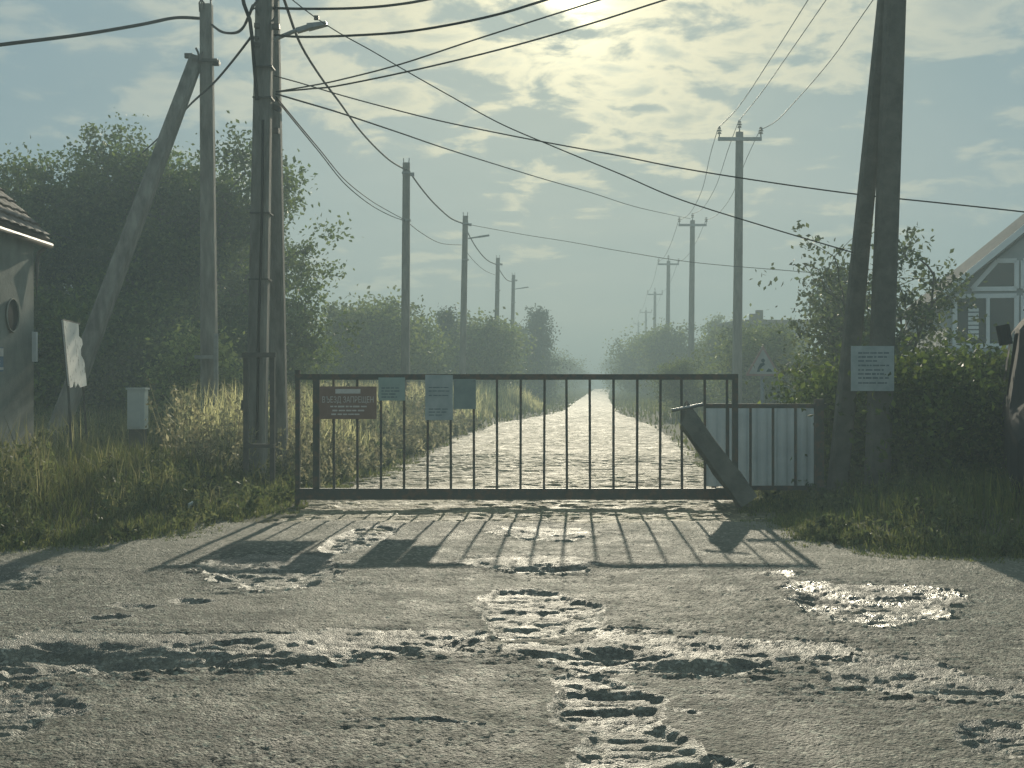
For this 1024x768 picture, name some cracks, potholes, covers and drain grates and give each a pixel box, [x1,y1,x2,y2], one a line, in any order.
pothole [807,654,1024,702]
pothole [318,525,401,554]
pothole [547,672,723,768]
pothole [473,588,609,640]
pothole [497,628,883,677]
pothole [0,626,492,686]
pothole [79,613,134,621]
pothole [484,526,602,541]
pothole [454,555,601,574]
pothole [950,718,1024,759]
pothole [168,597,217,605]
pothole [0,681,96,744]
